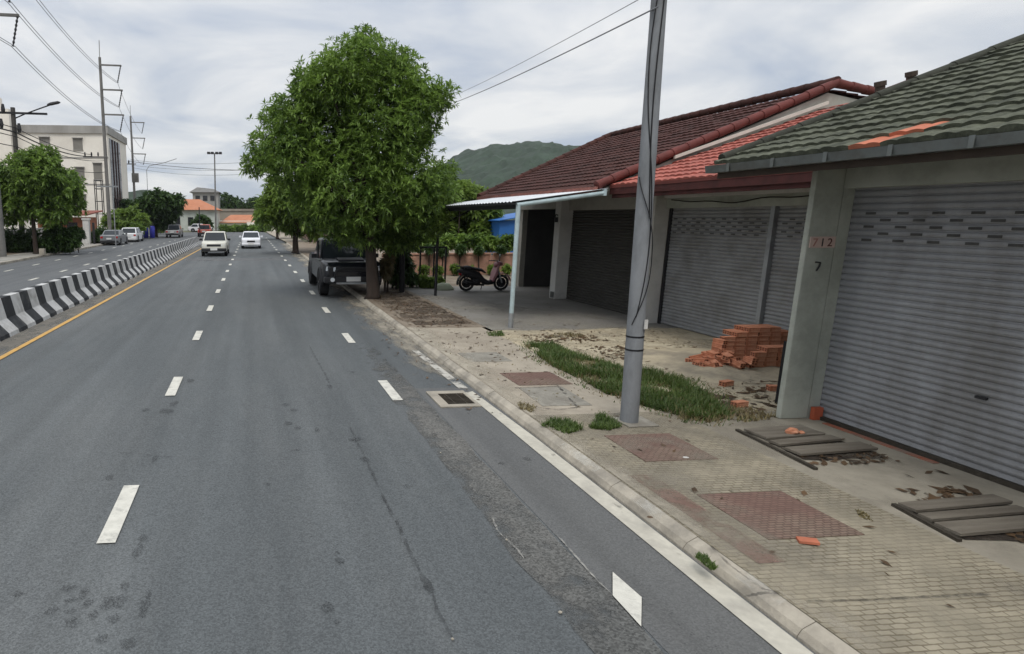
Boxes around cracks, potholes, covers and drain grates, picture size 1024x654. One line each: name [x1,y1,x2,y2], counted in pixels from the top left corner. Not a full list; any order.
manhole cover [604,433,718,462]
drain grate [426,390,482,408]
manhole cover [697,491,864,540]
manhole cover [500,372,572,386]
manhole cover [519,387,591,406]
